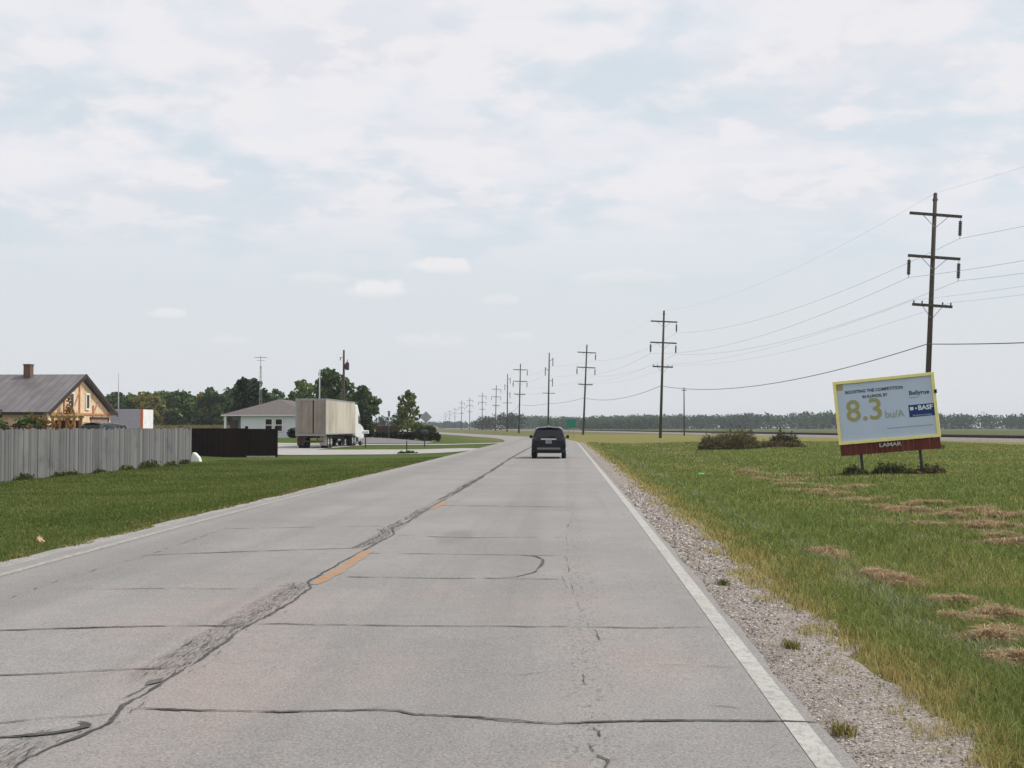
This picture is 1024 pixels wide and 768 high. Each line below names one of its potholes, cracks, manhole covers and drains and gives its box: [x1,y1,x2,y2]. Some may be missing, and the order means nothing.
crack [0,667,179,675]
crack [346,555,544,579]
crack [588,726,610,768]
crack [0,713,111,723]
